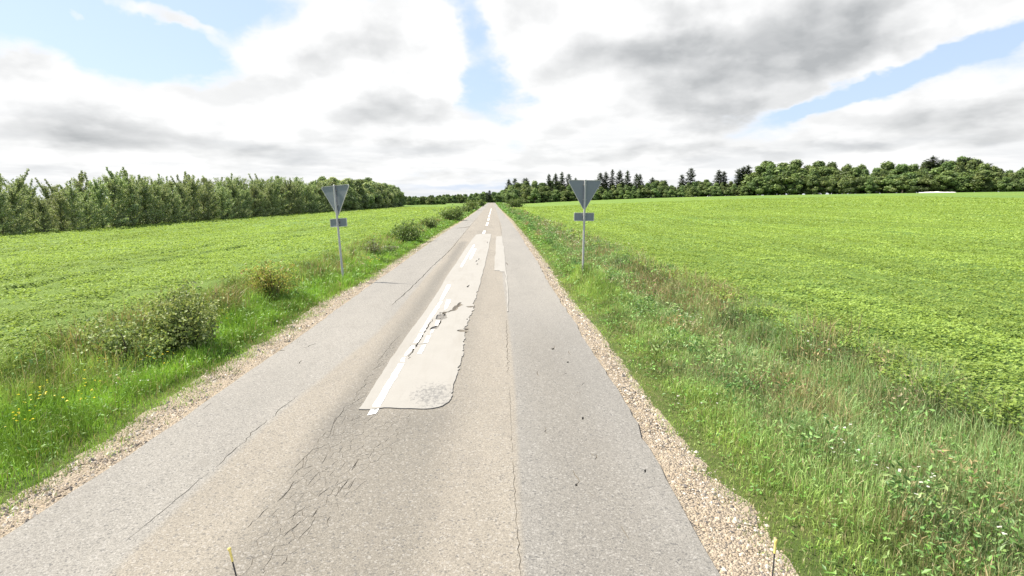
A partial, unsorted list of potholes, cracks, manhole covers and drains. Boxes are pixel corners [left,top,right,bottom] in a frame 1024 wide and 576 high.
crack [223,343,409,576]
